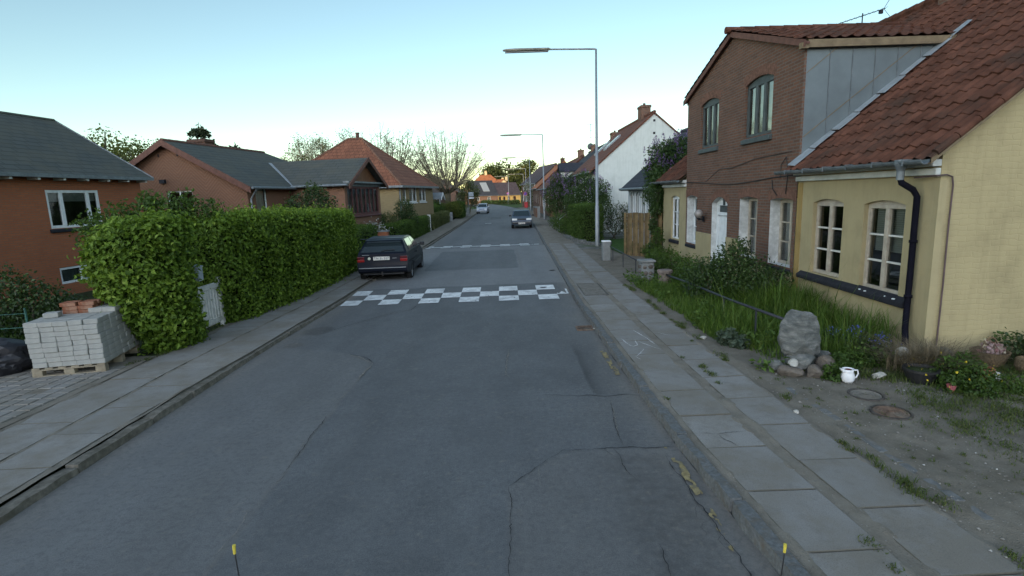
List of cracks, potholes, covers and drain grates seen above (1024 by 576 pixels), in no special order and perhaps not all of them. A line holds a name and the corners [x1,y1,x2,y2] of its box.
manhole cover [576,283,609,296]
crack [508,446,752,576]
manhole cover [847,388,885,402]
manhole cover [869,404,914,421]
